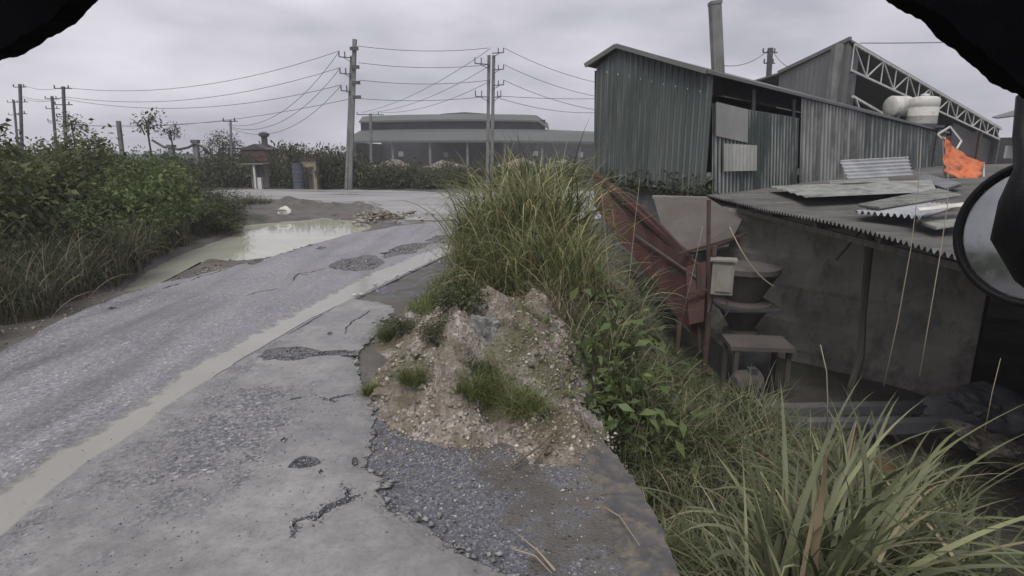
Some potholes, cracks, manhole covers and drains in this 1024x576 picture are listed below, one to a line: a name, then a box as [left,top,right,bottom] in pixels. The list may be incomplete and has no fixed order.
crack [288,393,353,402]
pothole [329,255,385,271]
pothole [258,346,359,361]
pothole [288,456,322,468]
crack [288,483,366,538]
pothole [378,242,433,258]
